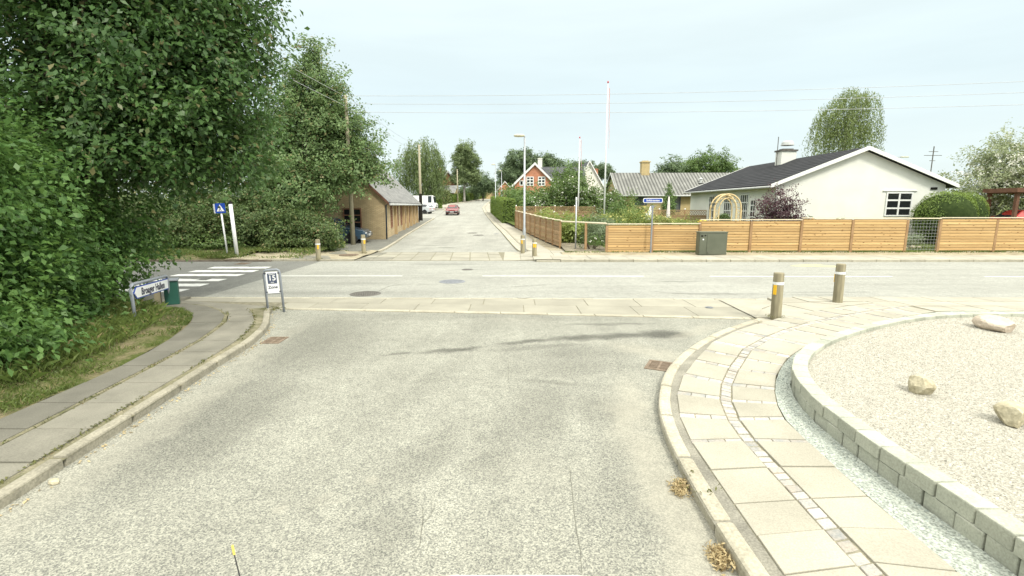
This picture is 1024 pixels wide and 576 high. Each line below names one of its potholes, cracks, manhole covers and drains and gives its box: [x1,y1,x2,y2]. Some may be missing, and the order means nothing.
drain grate [644,360,673,372]
crack [569,466,582,572]
